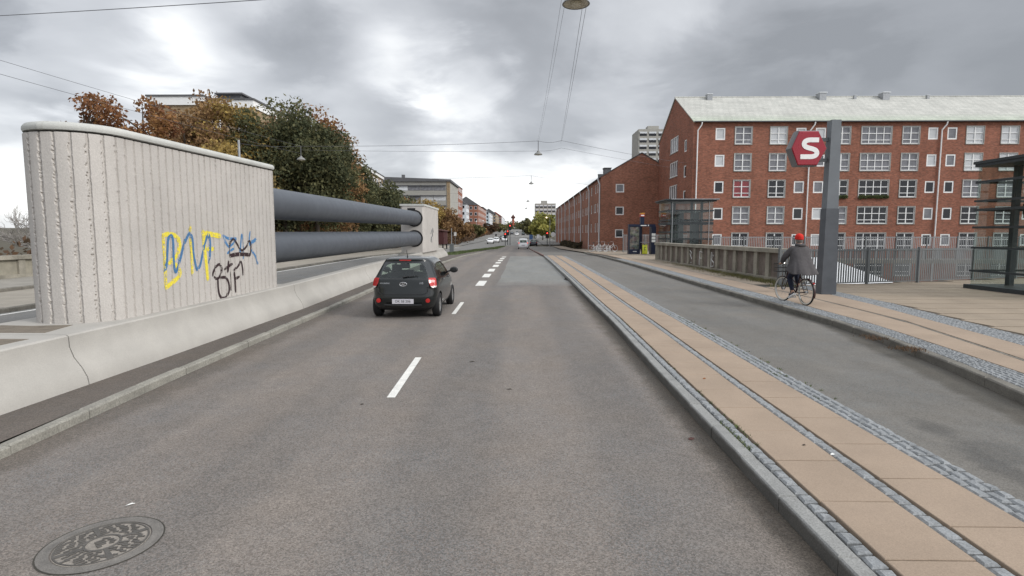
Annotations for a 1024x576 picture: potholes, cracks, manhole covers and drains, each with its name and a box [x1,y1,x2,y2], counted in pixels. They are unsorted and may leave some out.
manhole cover [32,516,165,575]
